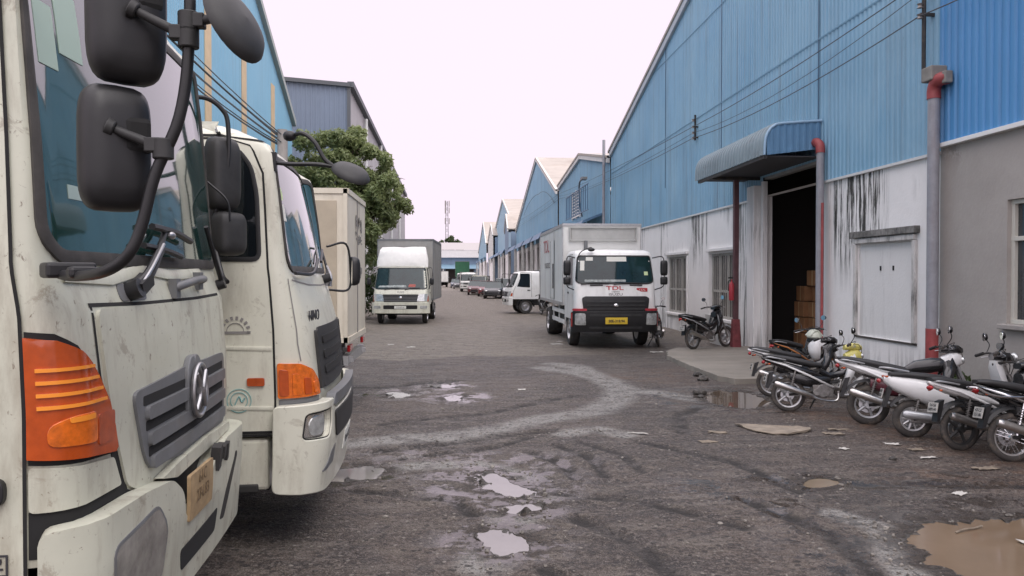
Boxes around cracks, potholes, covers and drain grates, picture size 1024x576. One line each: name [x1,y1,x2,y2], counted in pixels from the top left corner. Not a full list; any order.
pothole [331,465,387,483]
pothole [803,478,841,488]
pothole [473,529,531,557]
pothole [506,502,546,514]
pothole [473,471,537,499]
pothole [705,389,773,409]
pothole [901,516,1024,576]
pothole [443,394,464,402]
